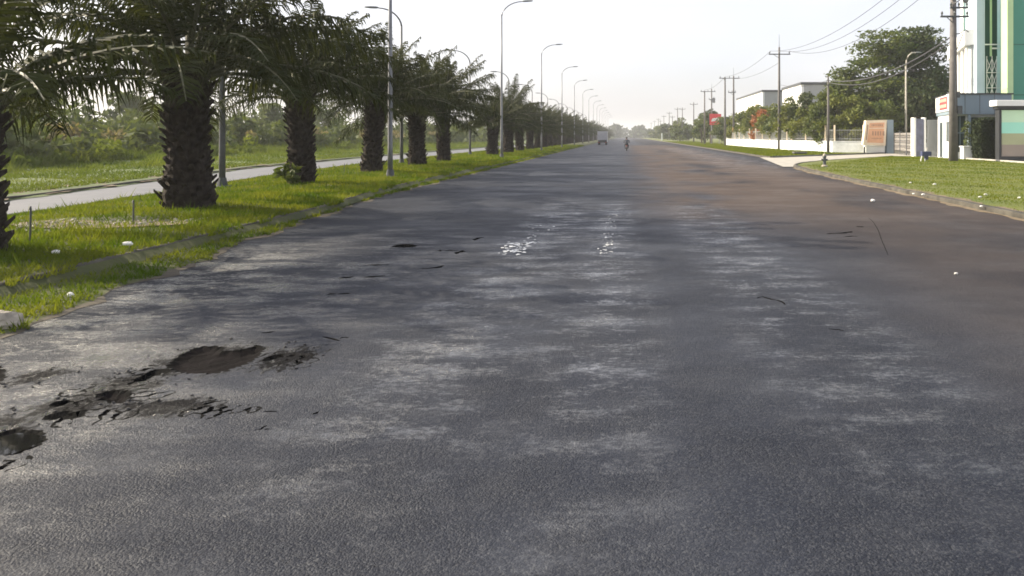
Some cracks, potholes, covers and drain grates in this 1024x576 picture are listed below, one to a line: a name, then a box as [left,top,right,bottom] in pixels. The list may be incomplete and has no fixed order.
pothole [0,428,48,456]
pothole [166,345,267,375]
crack [828,218,888,255]
pothole [95,389,134,404]
